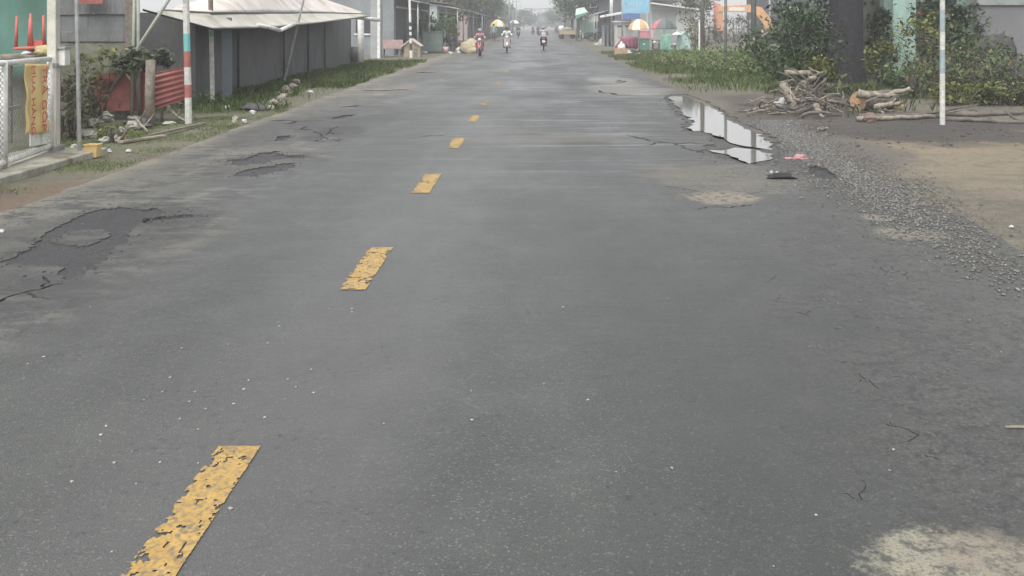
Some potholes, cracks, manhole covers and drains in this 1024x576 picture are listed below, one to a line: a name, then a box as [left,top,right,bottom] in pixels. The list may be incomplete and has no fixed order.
crack [599,80,641,96]
crack [628,135,717,153]
crack [885,419,950,461]
pothole [227,151,304,165]
pothole [235,163,297,177]
pothole [663,94,782,166]
crack [273,120,342,142]
pothole [0,207,164,280]
